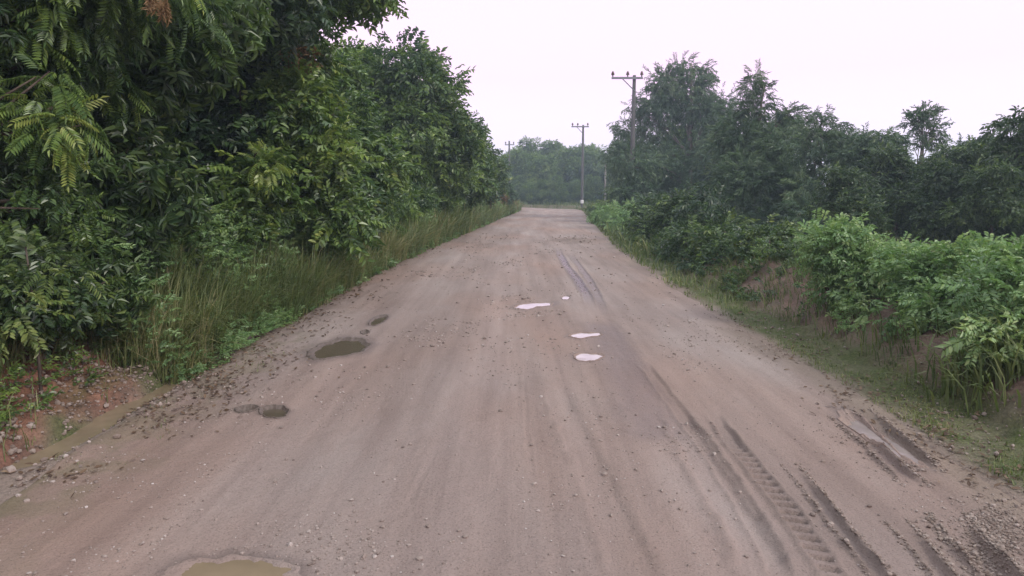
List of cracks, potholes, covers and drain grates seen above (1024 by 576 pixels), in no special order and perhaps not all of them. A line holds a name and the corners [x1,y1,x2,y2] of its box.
pothole [258,404,290,419]
pothole [162,554,302,576]
pothole [513,302,554,310]
pothole [306,337,372,360]
pothole [368,314,389,326]
pothole [572,352,605,362]
pothole [234,404,260,413]
